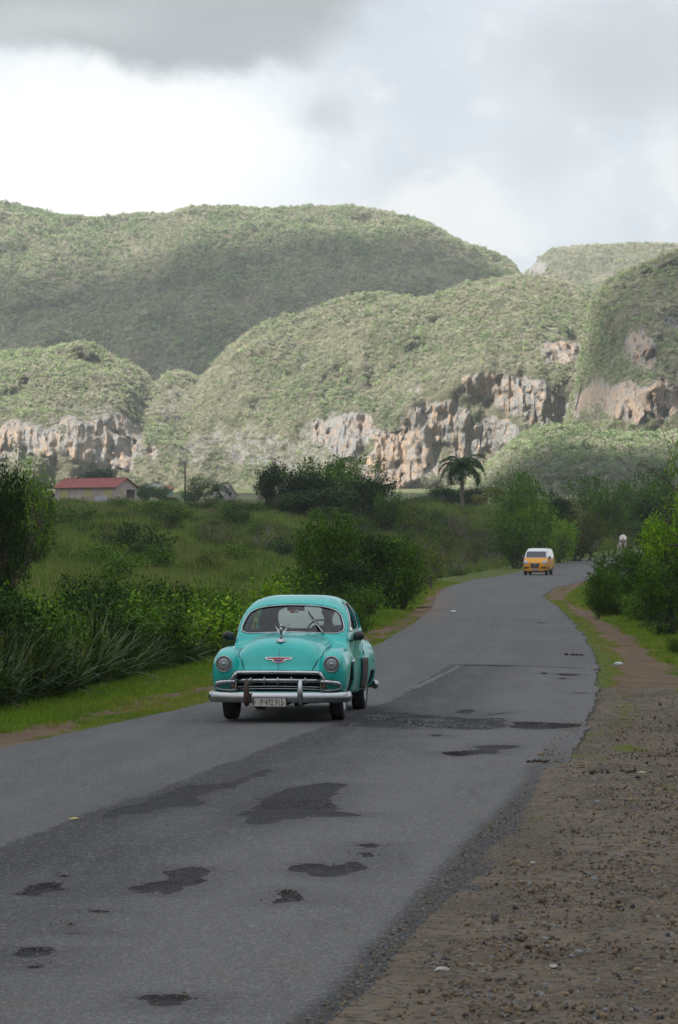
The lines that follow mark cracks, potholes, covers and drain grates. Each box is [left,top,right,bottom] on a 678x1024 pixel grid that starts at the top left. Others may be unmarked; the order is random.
pothole [337,710,508,730]
